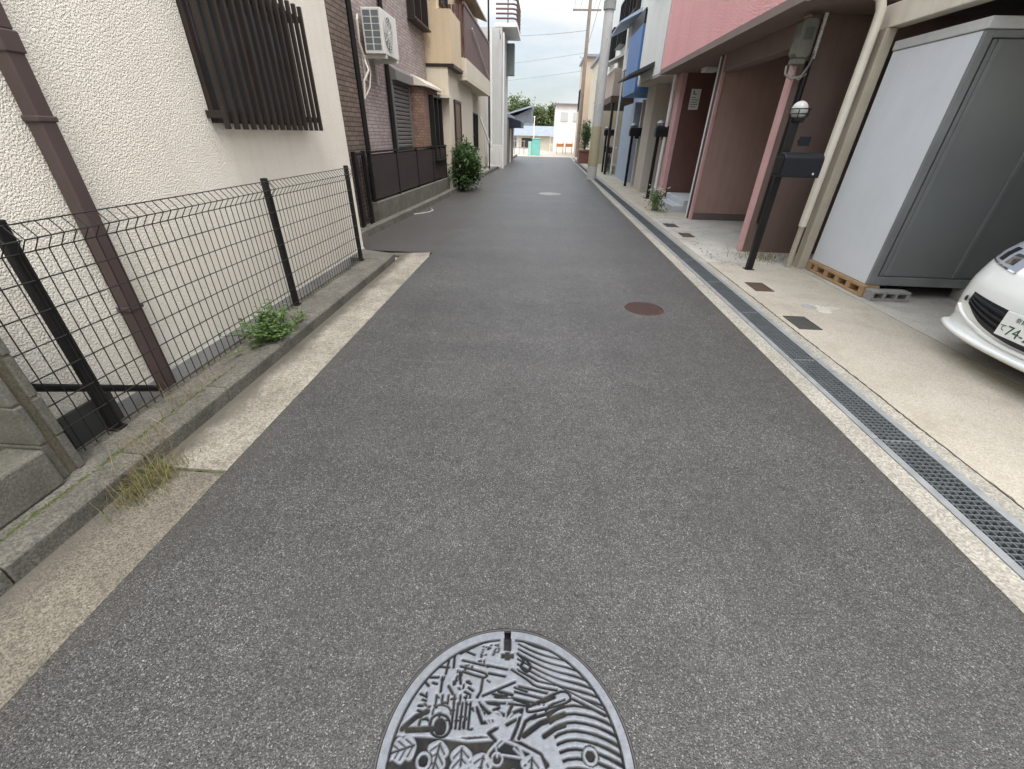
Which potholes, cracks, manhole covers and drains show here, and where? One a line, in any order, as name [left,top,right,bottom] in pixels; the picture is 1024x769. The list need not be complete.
manhole cover [373,629,638,769]
drain grate [648,230,677,244]
drain grate [661,243,696,260]
drain grate [872,438,1024,580]
drain grate [734,311,819,360]
manhole cover [624,302,664,316]
drain grate [701,280,761,313]
drain grate [785,358,920,442]
drain grate [638,221,662,231]
drain grate [678,259,723,282]
drain grate [629,213,650,221]
